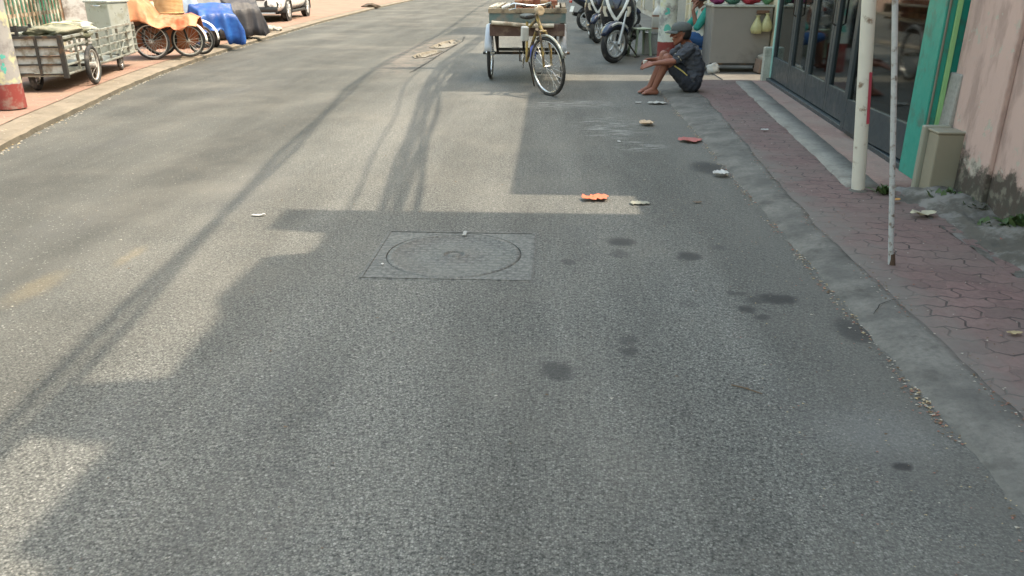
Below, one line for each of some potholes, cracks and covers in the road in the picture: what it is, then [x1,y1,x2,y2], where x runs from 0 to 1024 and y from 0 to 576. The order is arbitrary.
manhole cover [358,231,537,283]
